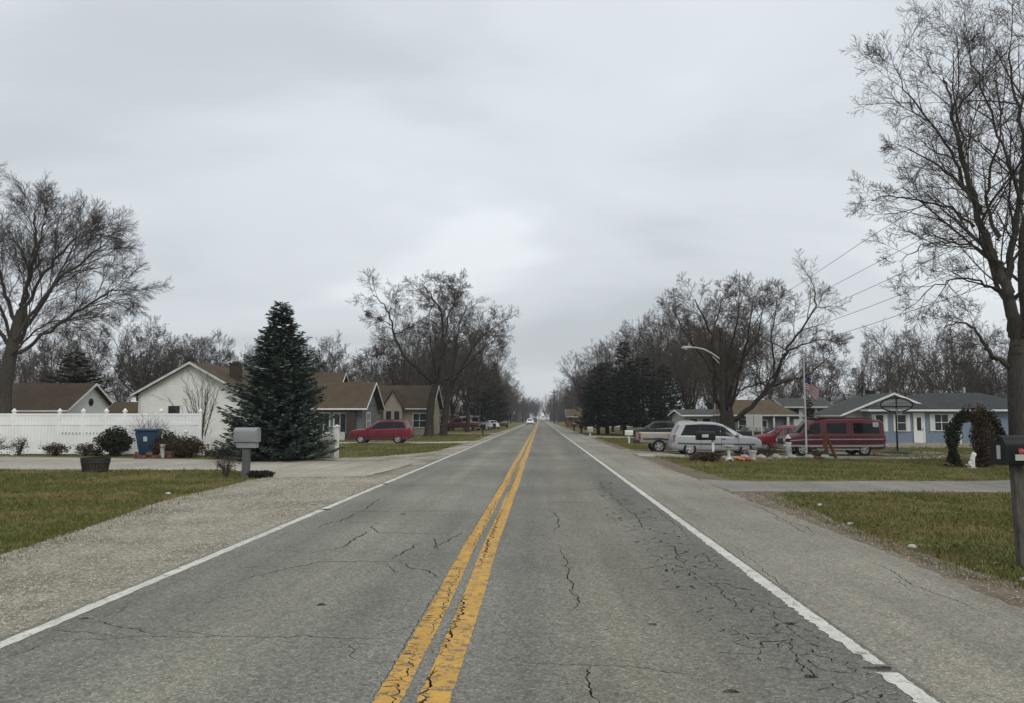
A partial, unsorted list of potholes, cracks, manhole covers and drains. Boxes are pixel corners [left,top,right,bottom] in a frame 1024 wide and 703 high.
crack [7,465,723,703]
crack [545,480,901,703]
